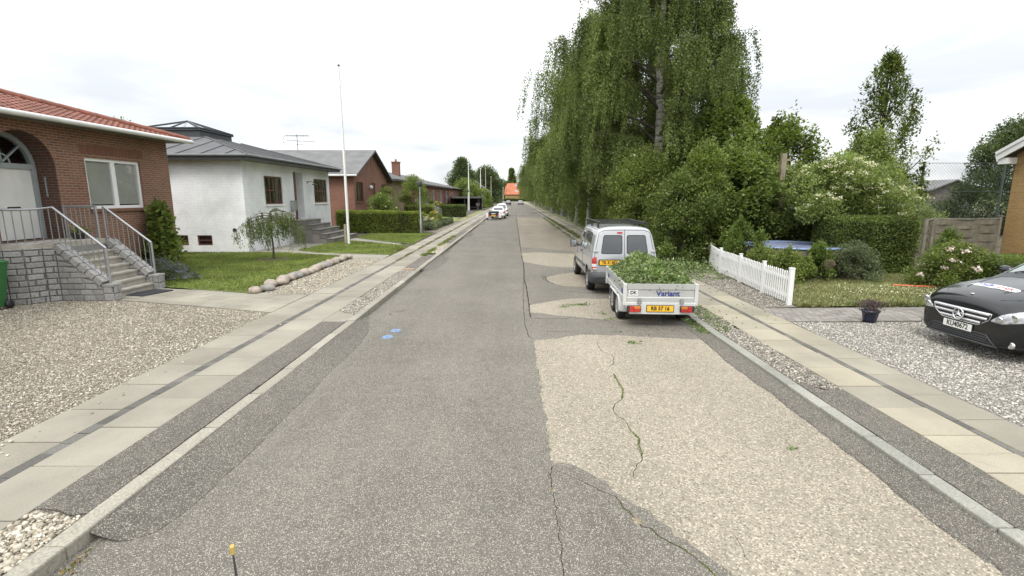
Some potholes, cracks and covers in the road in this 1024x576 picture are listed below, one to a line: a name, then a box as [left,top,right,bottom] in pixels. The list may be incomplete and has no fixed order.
crack [575,332,671,476]
crack [542,451,749,576]
